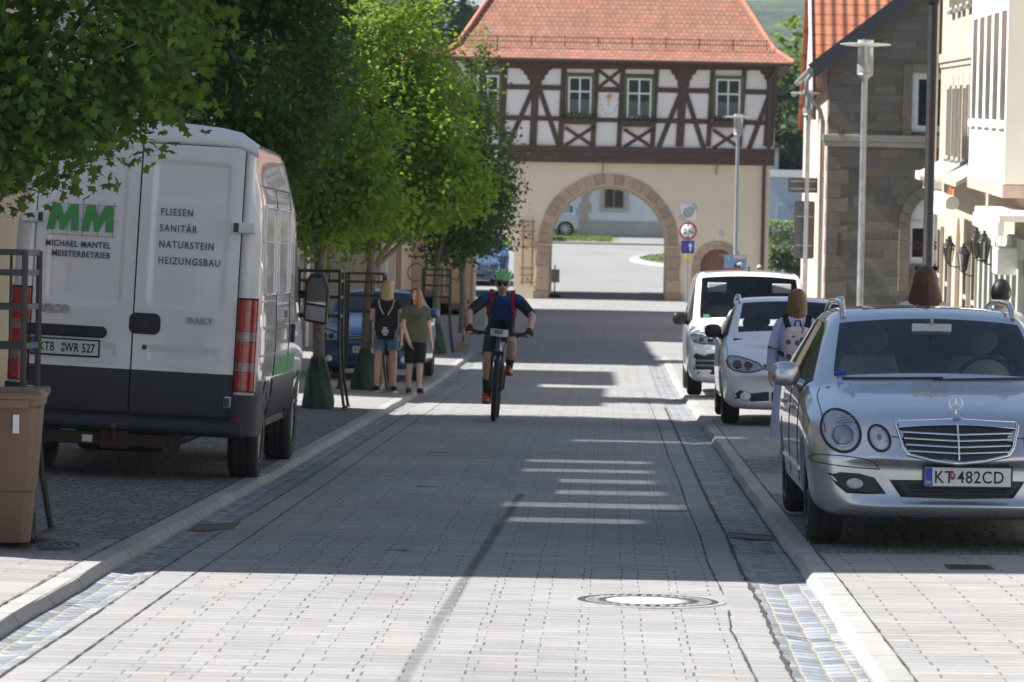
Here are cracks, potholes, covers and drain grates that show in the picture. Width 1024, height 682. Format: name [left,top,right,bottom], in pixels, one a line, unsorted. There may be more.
manhole cover [571,594,726,609]
